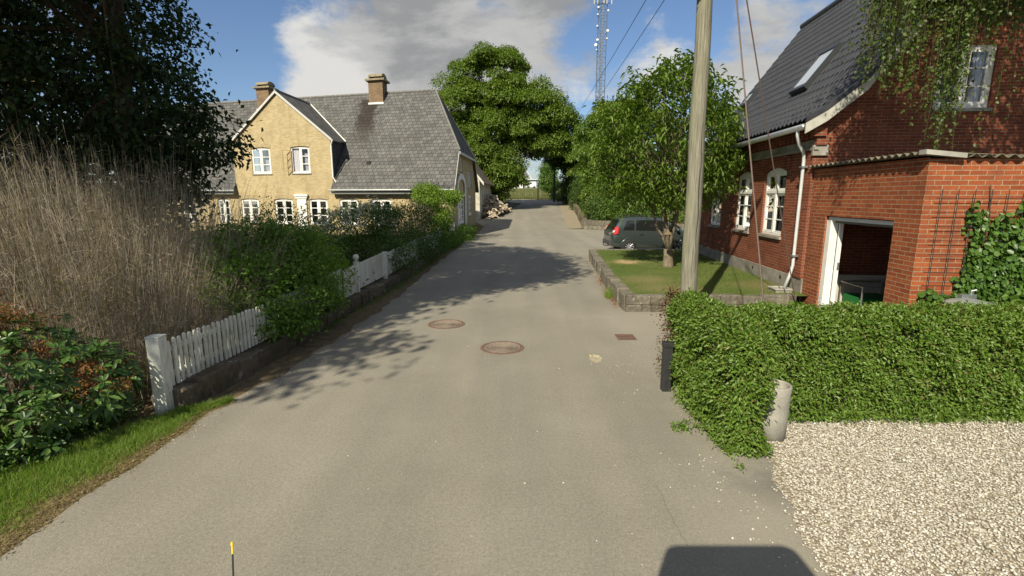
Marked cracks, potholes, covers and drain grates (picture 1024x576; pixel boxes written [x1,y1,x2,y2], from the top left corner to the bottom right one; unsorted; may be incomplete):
manhole cover [428,319,465,329]
manhole cover [480,341,524,355]
